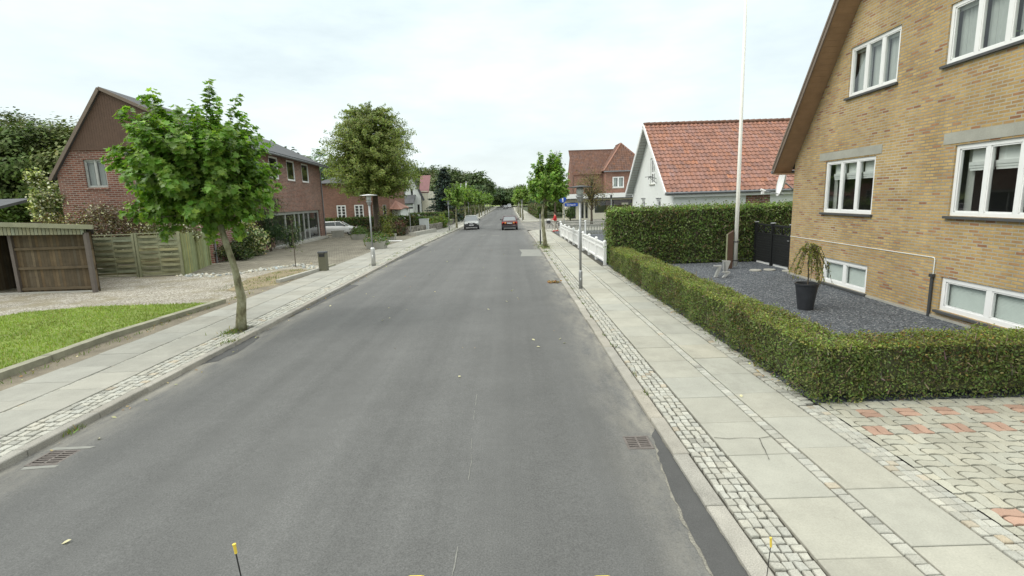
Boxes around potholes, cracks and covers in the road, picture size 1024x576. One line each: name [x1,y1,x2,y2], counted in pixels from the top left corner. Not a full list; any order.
drain grate [622,436,655,449]
drain grate [24,450,80,467]
